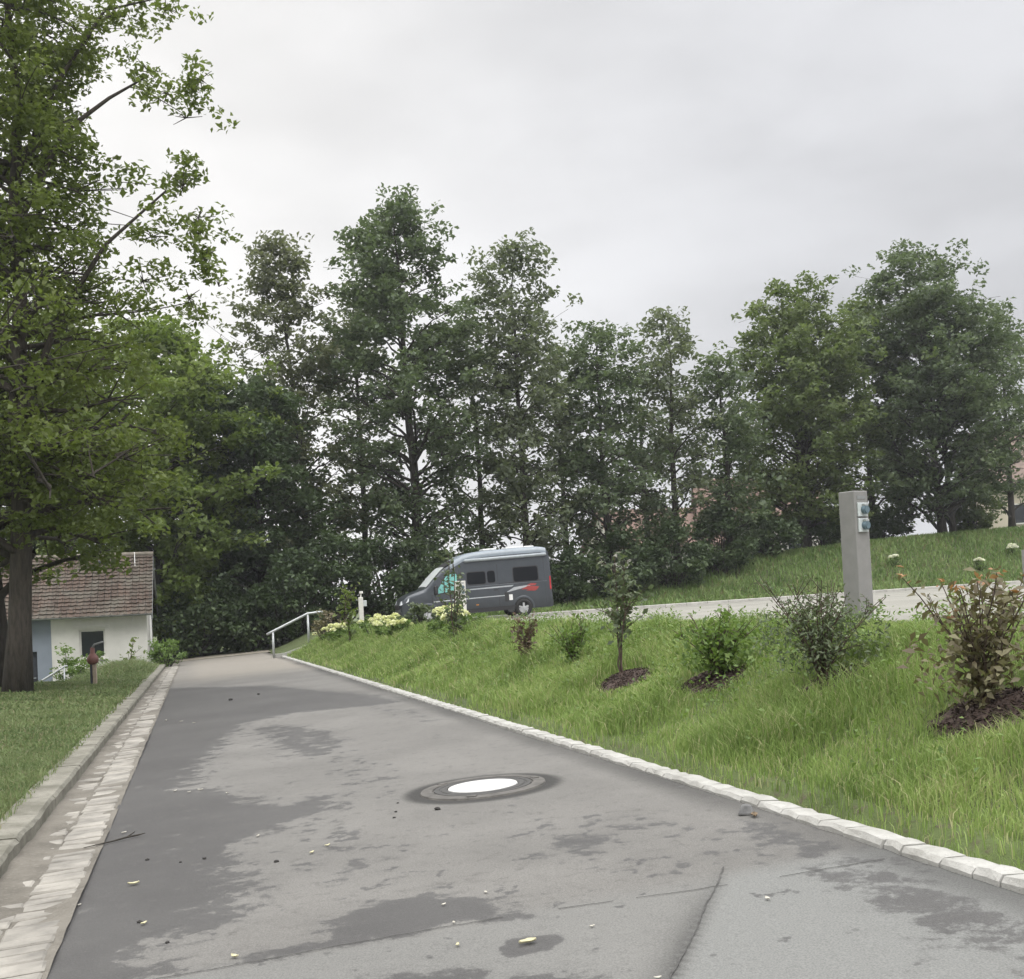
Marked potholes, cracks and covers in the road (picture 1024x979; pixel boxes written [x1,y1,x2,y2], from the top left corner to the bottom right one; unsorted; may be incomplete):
manhole cover [420,774,546,801]
